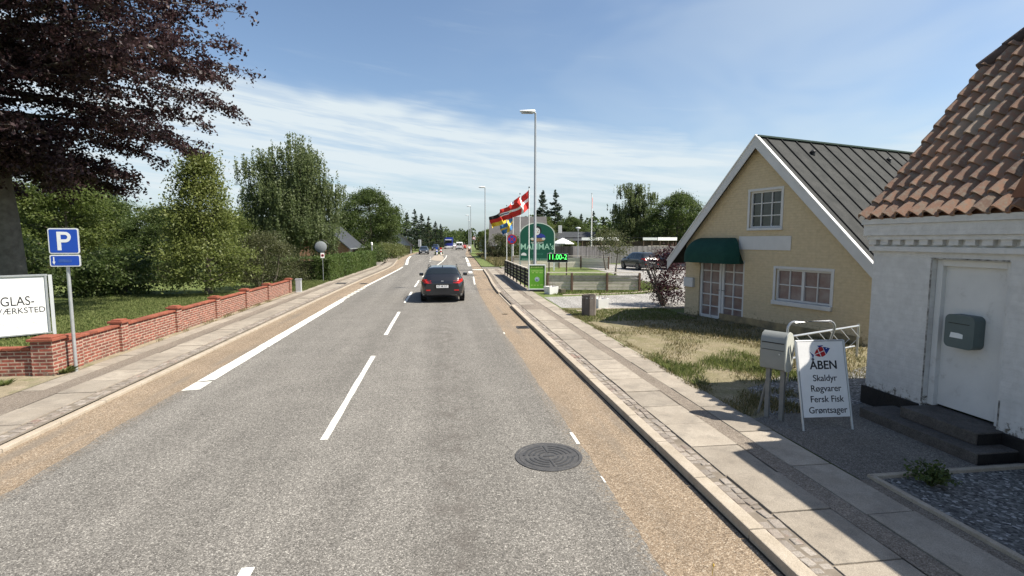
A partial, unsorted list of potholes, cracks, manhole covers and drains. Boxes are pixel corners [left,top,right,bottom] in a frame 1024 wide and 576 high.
manhole cover [515,443,583,472]
